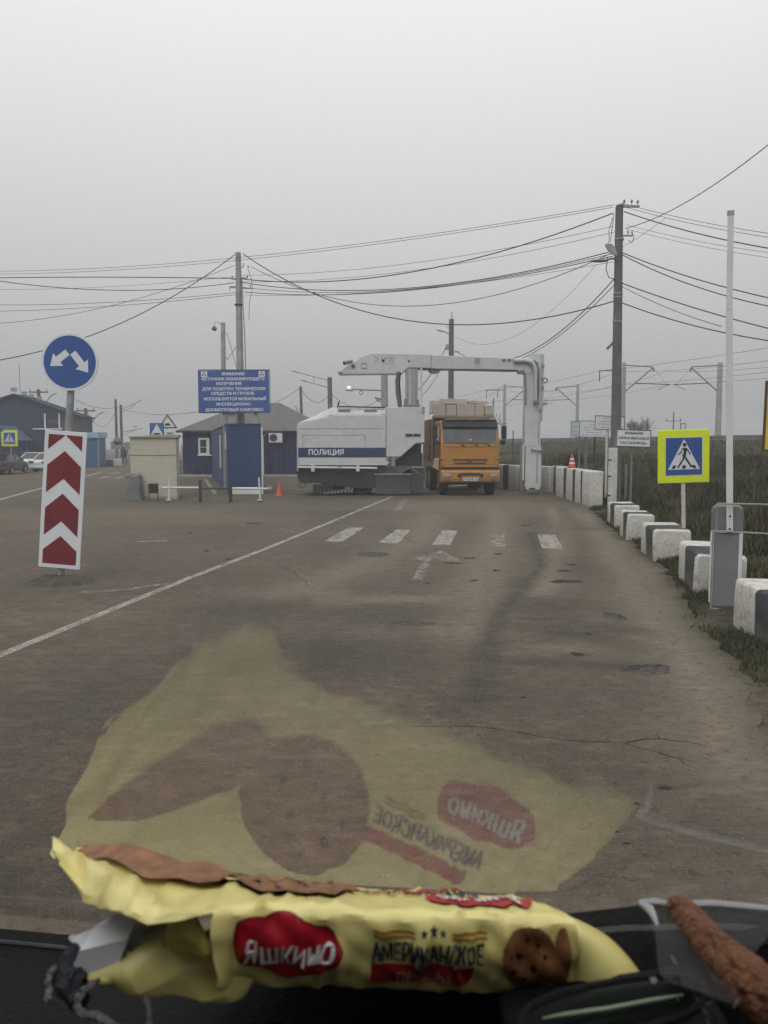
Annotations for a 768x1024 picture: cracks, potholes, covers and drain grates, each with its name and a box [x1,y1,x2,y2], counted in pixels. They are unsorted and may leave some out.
pothole [603,612,628,621]
pothole [616,664,670,676]
crack [412,726,704,768]
